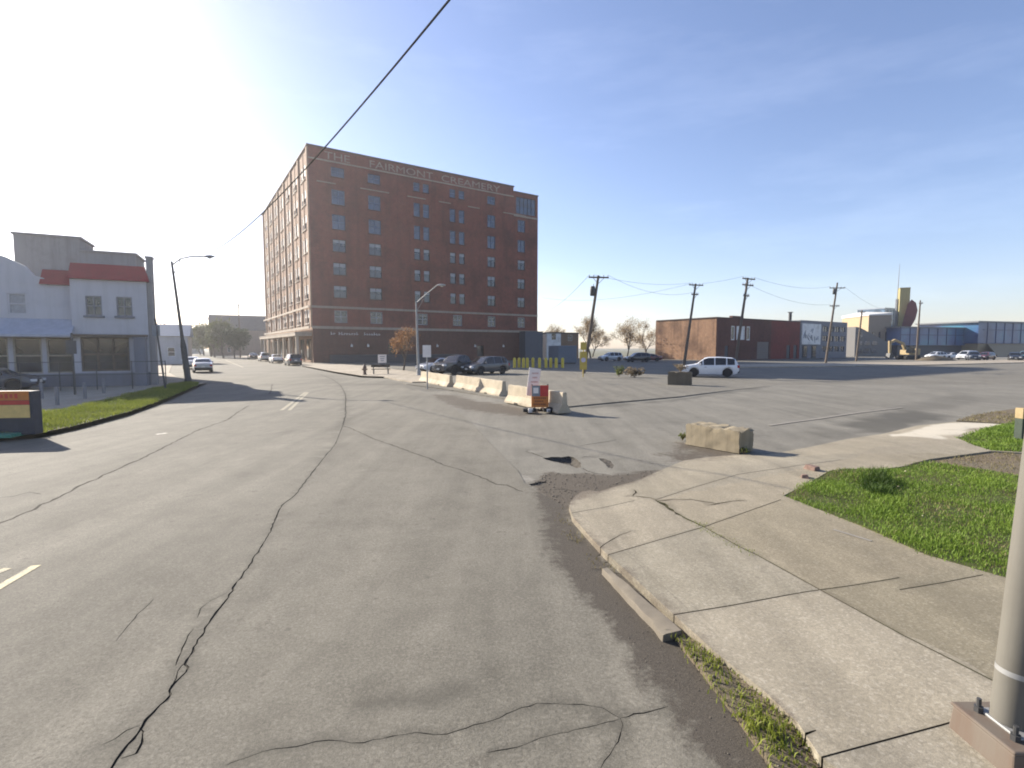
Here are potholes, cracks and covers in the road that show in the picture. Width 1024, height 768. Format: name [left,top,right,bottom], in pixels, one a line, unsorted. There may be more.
crack [102,377,523,768]
crack [633,490,745,526]
crack [227,703,668,767]
crack [0,406,247,524]
pothole [544,456,581,468]
